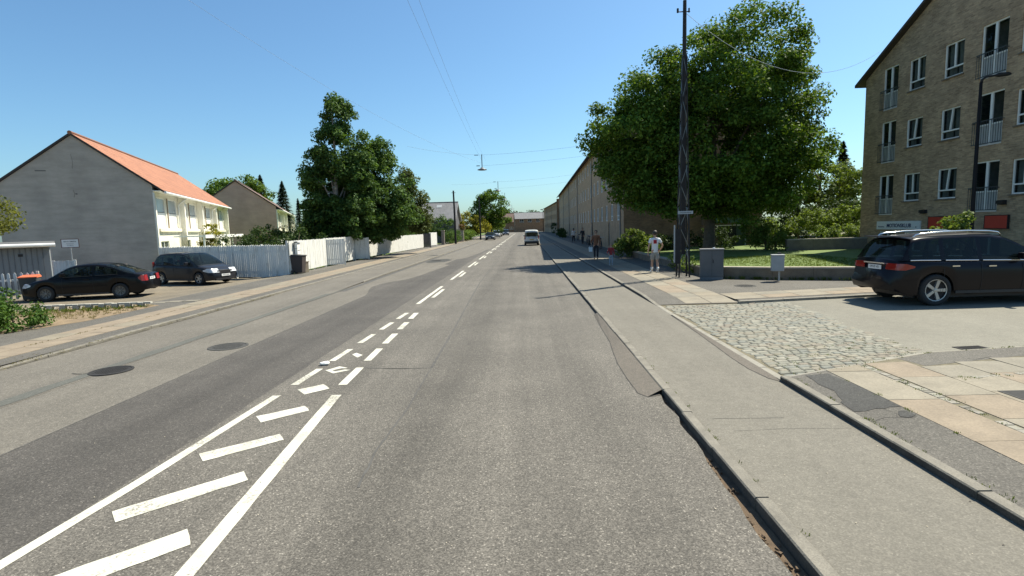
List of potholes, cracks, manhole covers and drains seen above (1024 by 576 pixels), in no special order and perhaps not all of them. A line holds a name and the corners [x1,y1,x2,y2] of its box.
manhole cover [207,342,249,351]
manhole cover [87,365,135,376]
